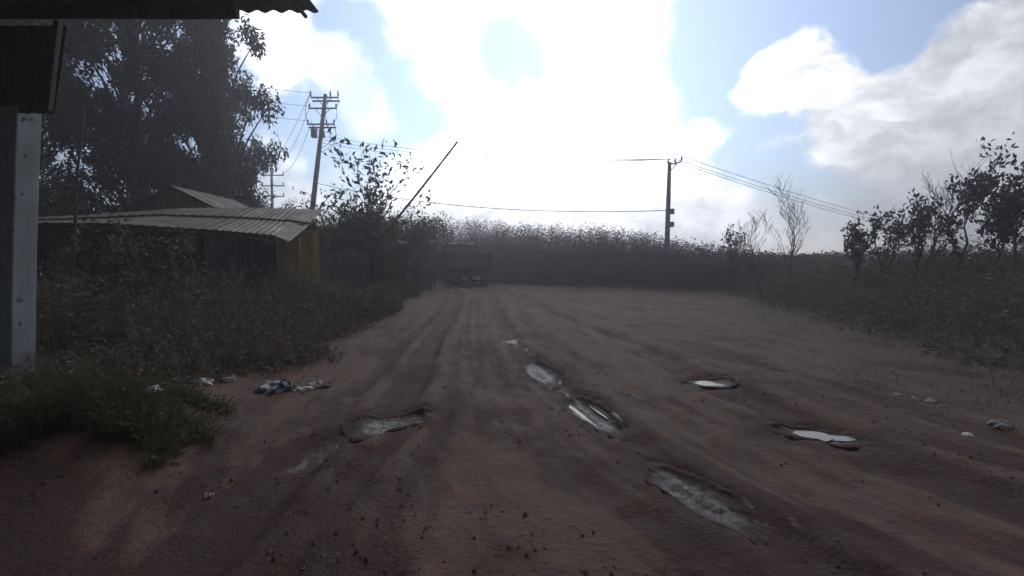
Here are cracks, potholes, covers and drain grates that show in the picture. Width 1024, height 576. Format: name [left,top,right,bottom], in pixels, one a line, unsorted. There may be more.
pothole [679,376,742,390]
pothole [339,406,434,444]
pothole [519,358,566,390]
pothole [764,421,878,452]
pothole [559,394,633,442]
pothole [635,461,774,546]
